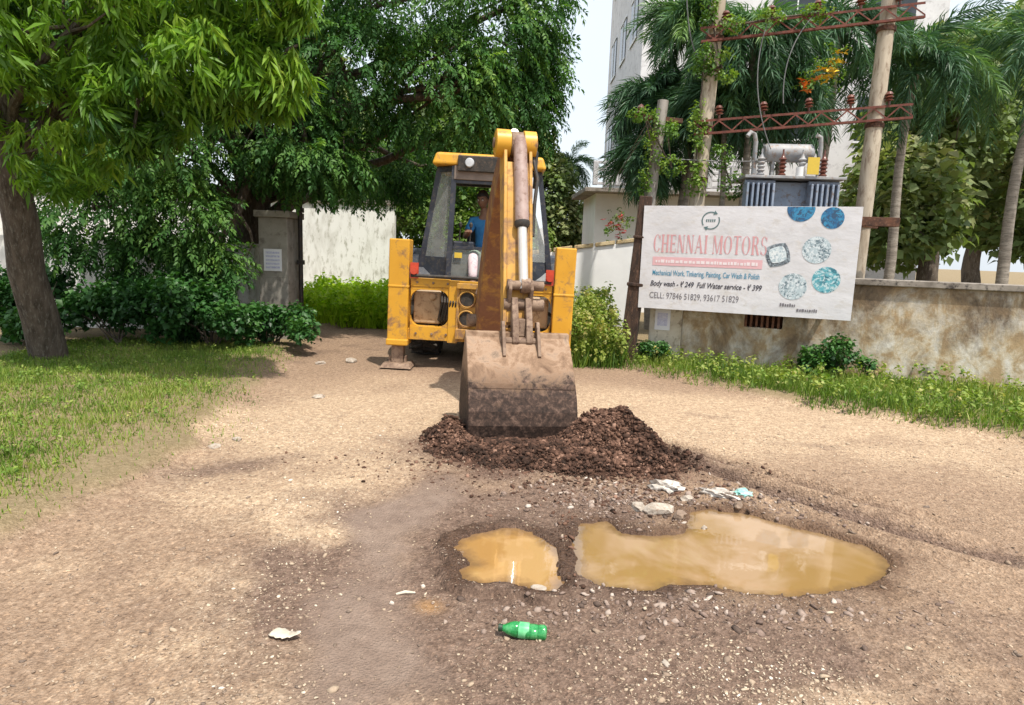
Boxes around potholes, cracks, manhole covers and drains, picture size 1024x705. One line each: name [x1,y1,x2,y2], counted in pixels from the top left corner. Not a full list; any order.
pothole [564,503,901,600]
pothole [444,522,578,593]
